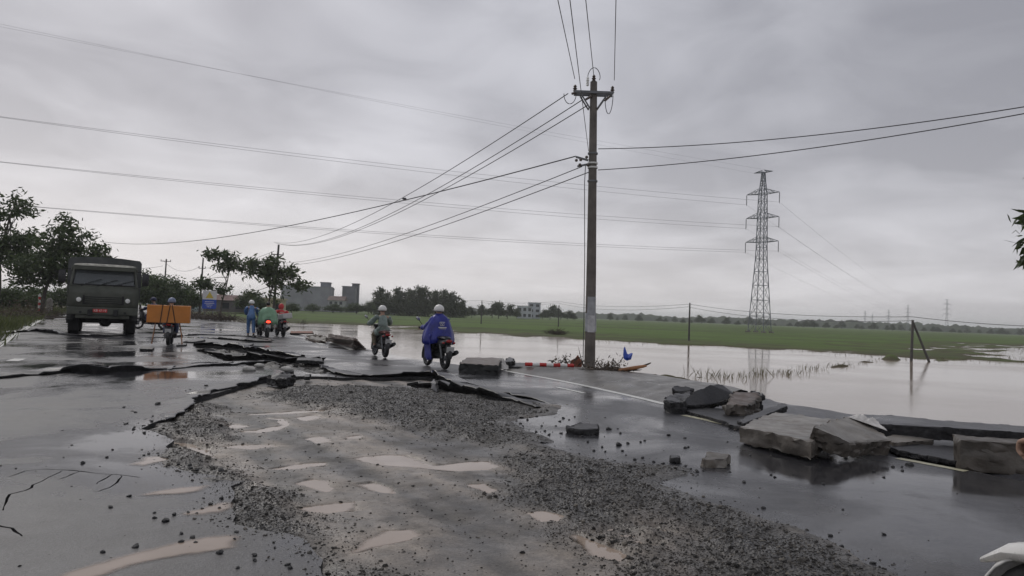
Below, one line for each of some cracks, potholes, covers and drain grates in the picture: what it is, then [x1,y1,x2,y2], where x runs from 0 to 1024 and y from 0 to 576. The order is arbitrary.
crack [0,360,294,421]
pothole [150,379,898,576]
